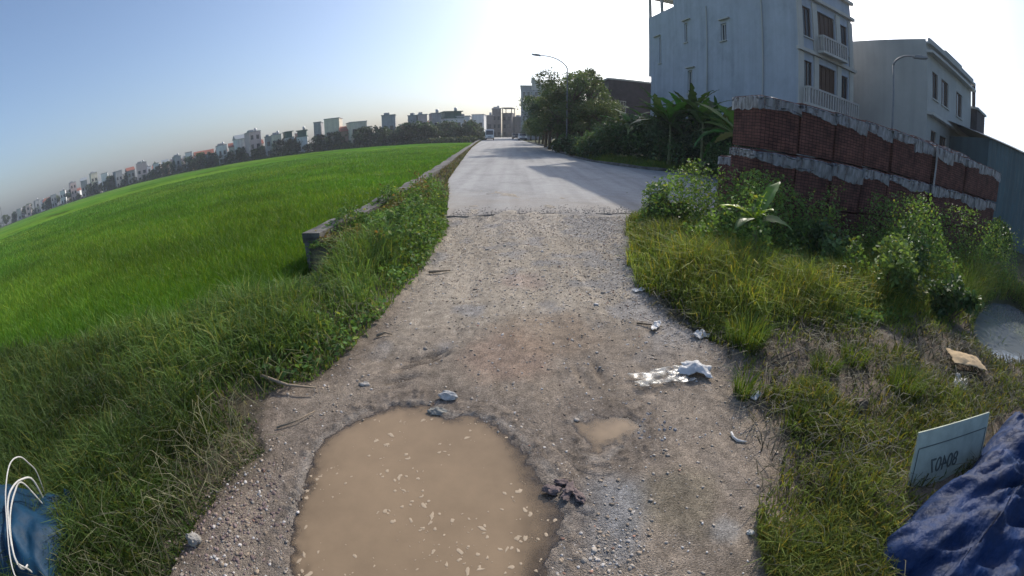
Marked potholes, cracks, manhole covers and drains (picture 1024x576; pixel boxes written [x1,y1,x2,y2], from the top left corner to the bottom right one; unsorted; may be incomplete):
pothole [255,388,596,576]
